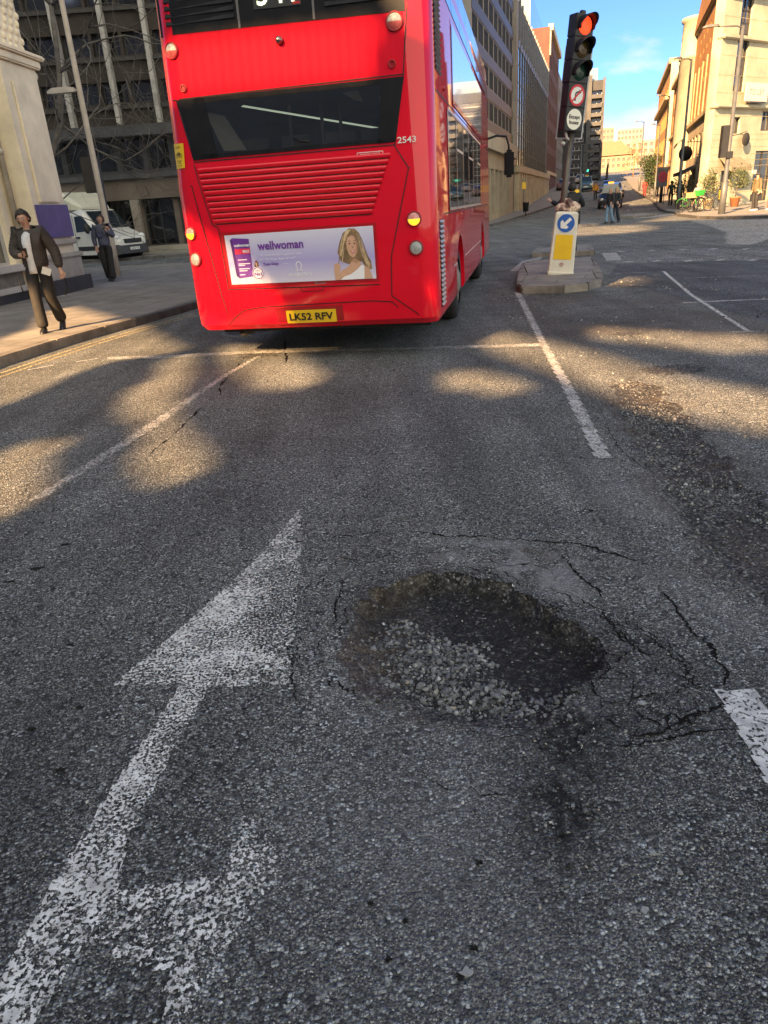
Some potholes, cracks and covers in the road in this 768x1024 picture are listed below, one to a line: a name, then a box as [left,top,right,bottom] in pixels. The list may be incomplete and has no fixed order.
pothole [336,571,619,730]
crack [283,530,733,761]
